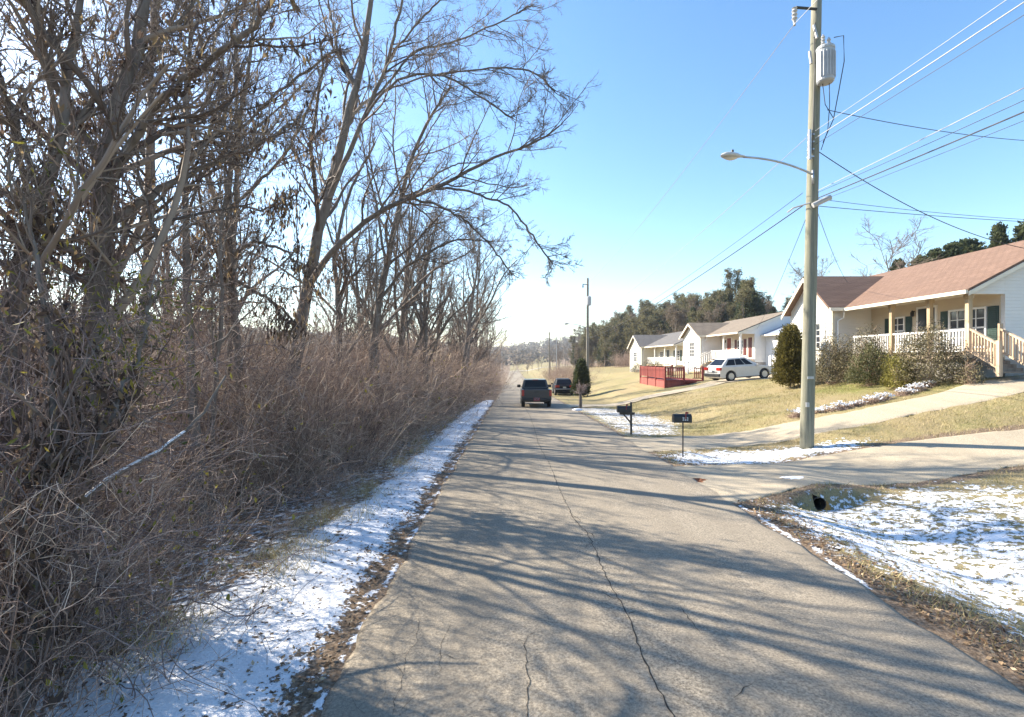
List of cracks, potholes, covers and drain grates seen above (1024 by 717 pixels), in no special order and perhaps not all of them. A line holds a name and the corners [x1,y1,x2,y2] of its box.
crack [518,631,536,717]
crack [358,618,469,716]
